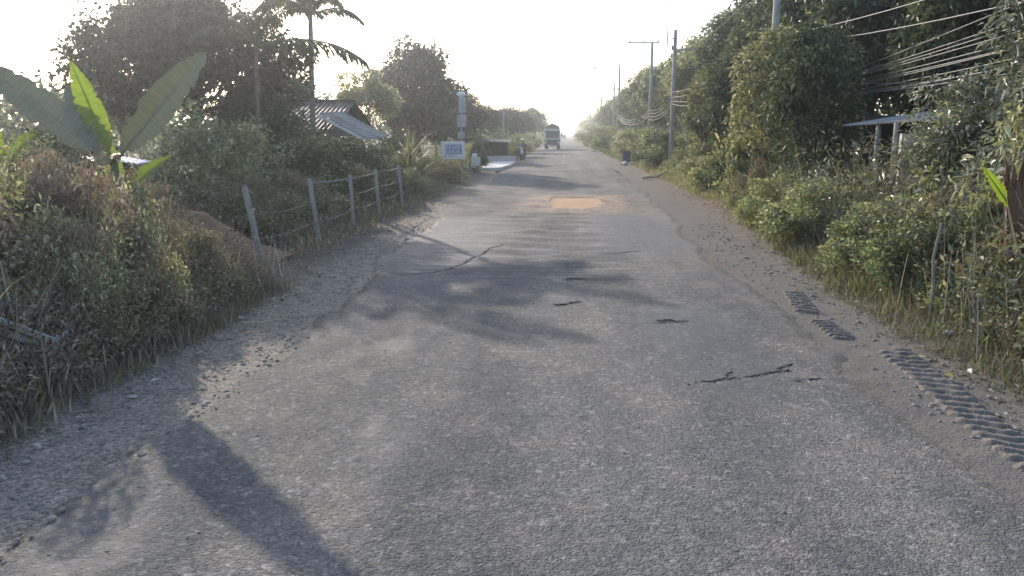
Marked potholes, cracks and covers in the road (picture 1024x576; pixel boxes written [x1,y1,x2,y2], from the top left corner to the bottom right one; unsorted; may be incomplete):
crack [688,365,822,385]
